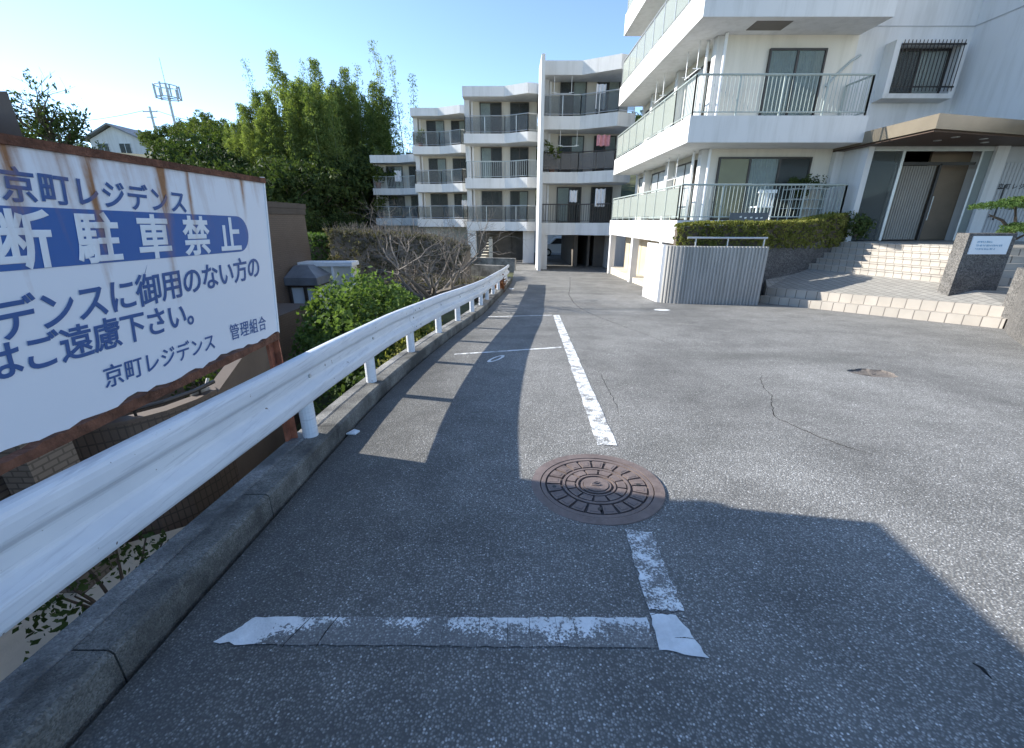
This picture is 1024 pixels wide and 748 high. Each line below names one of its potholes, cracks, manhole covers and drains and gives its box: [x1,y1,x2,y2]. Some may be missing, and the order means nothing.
pothole [847,368,898,378]
crack [973,663,992,679]
crack [761,380,869,454]
manhole cover [532,454,665,526]
